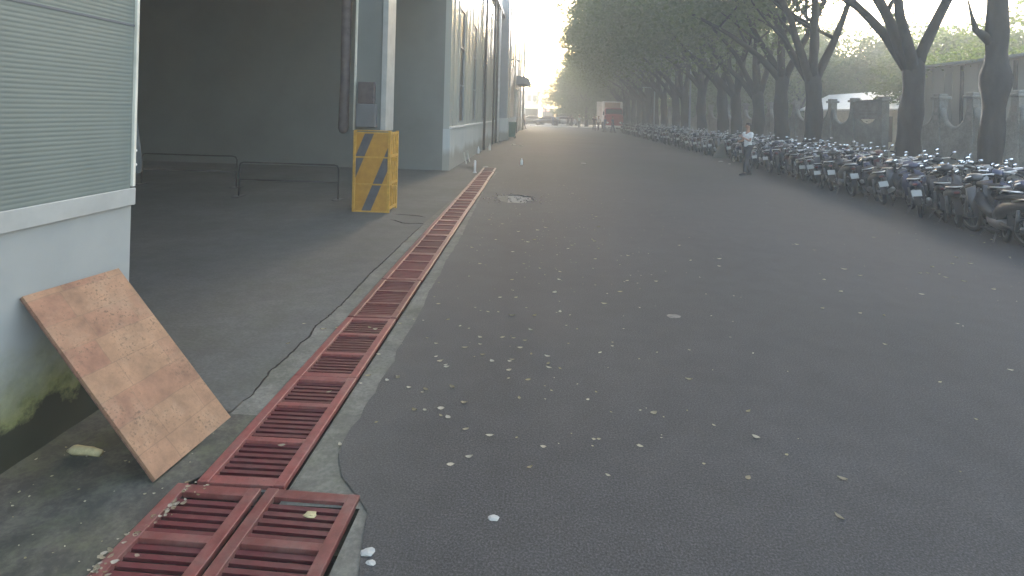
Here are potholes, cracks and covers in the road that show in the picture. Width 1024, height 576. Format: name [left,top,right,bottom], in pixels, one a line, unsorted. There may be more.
drain grate [406,234,452,256]
drain grate [348,279,421,321]
drain grate [423,220,461,236]
drain grate [462,185,485,193]
drain grate [455,192,480,201]
drain grate [382,253,439,283]
drain grate [87,483,261,576]
drain grate [202,488,360,576]
drain grate [436,208,469,222]
drain grate [447,199,475,210]
drain grate [197,375,357,490]
